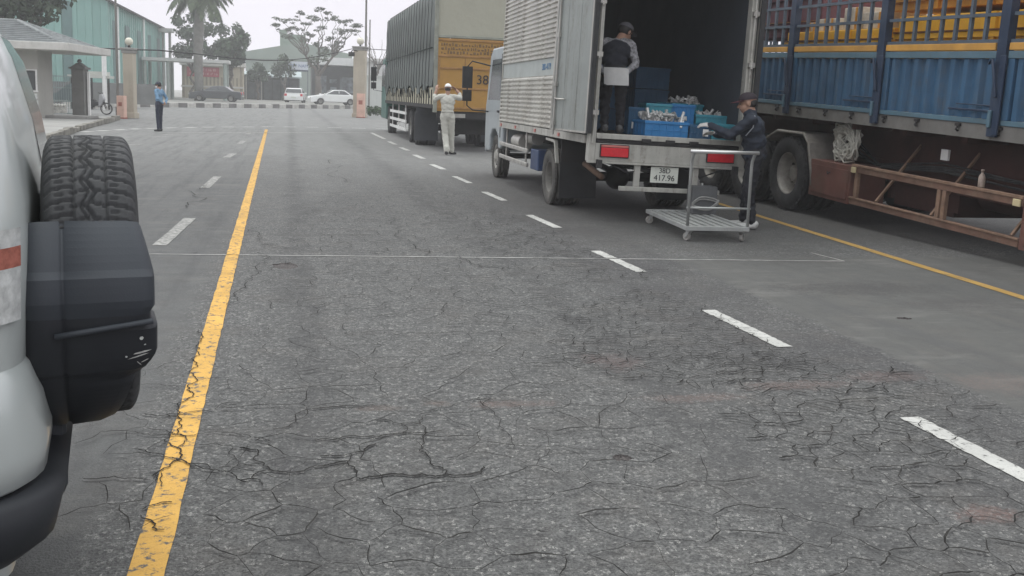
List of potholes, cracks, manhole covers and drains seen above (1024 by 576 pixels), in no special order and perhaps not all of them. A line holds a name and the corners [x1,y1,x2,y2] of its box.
crack [58,319,875,576]
crack [542,287,1024,576]
